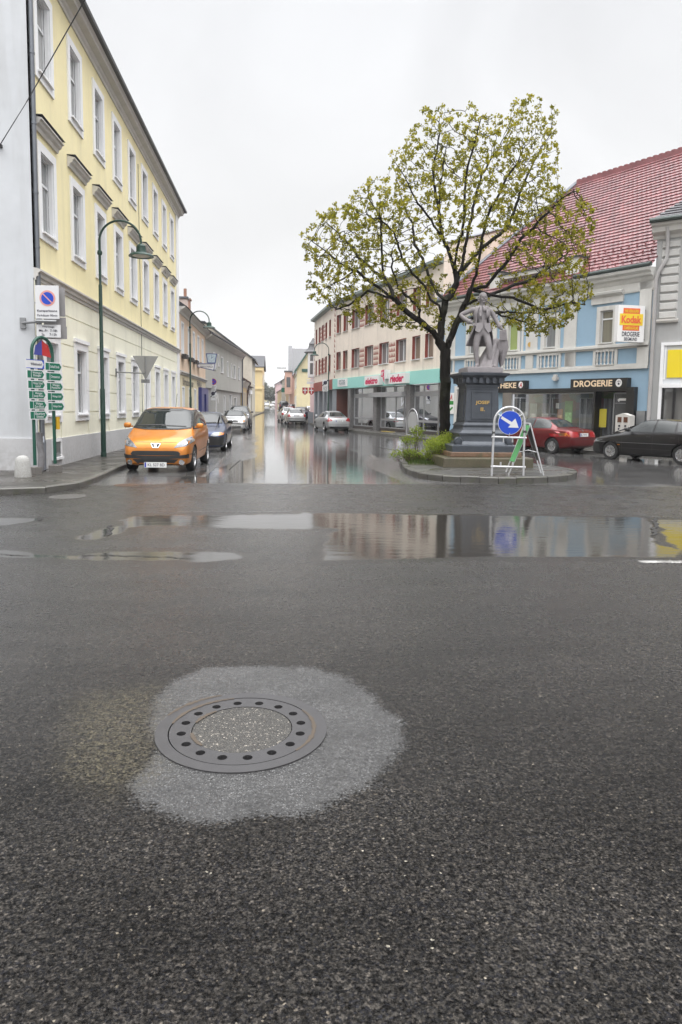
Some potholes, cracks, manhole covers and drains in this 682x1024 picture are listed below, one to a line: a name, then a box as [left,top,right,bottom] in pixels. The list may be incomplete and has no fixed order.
manhole cover [155,693,327,774]
